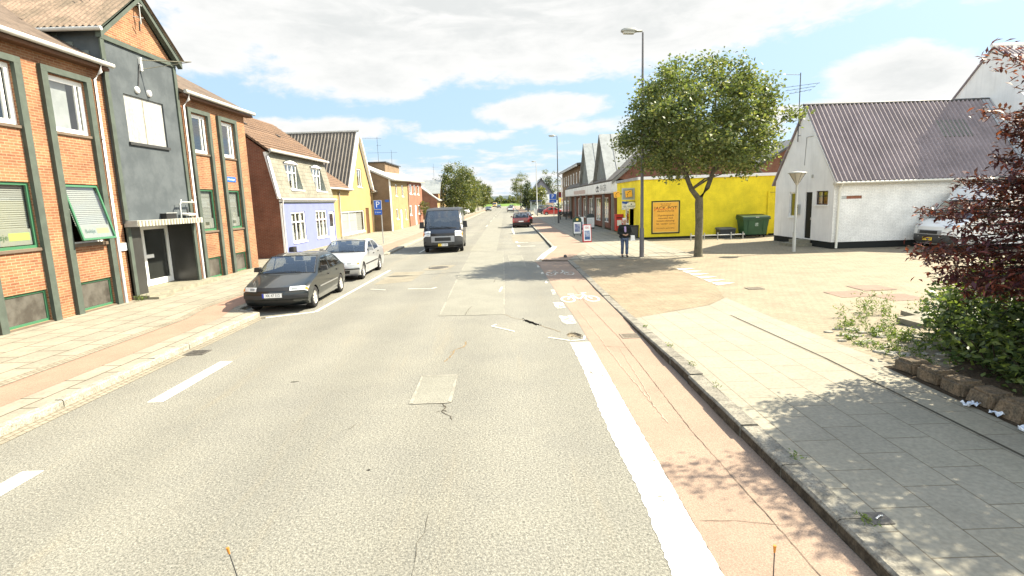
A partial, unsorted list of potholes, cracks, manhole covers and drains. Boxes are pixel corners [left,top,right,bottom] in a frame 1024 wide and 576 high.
utility cover [858,511,896,526]
